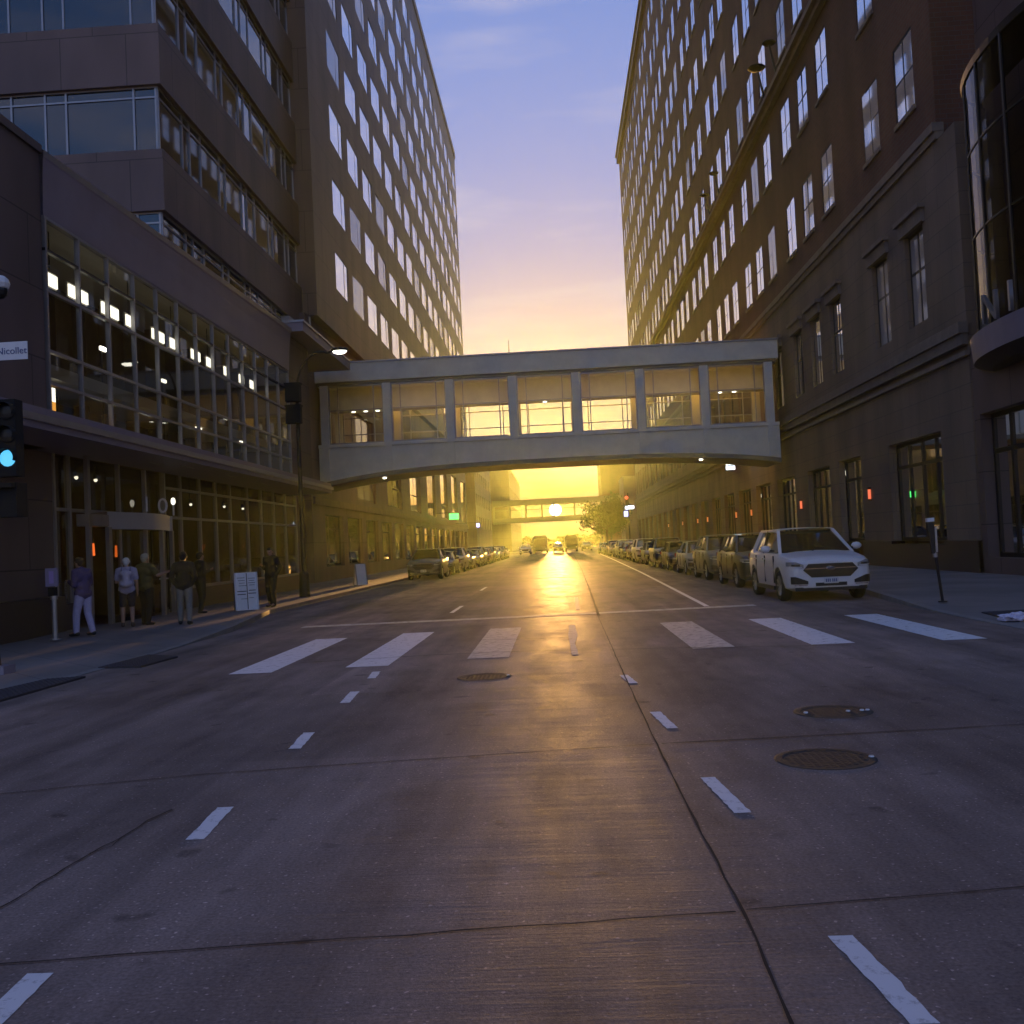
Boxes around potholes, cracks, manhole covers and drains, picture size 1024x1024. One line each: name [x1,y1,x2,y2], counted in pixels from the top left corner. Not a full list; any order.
manhole cover [457,673,512,681]
crack [0,809,172,908]
manhole cover [774,748,878,770]
manhole cover [793,705,874,718]
